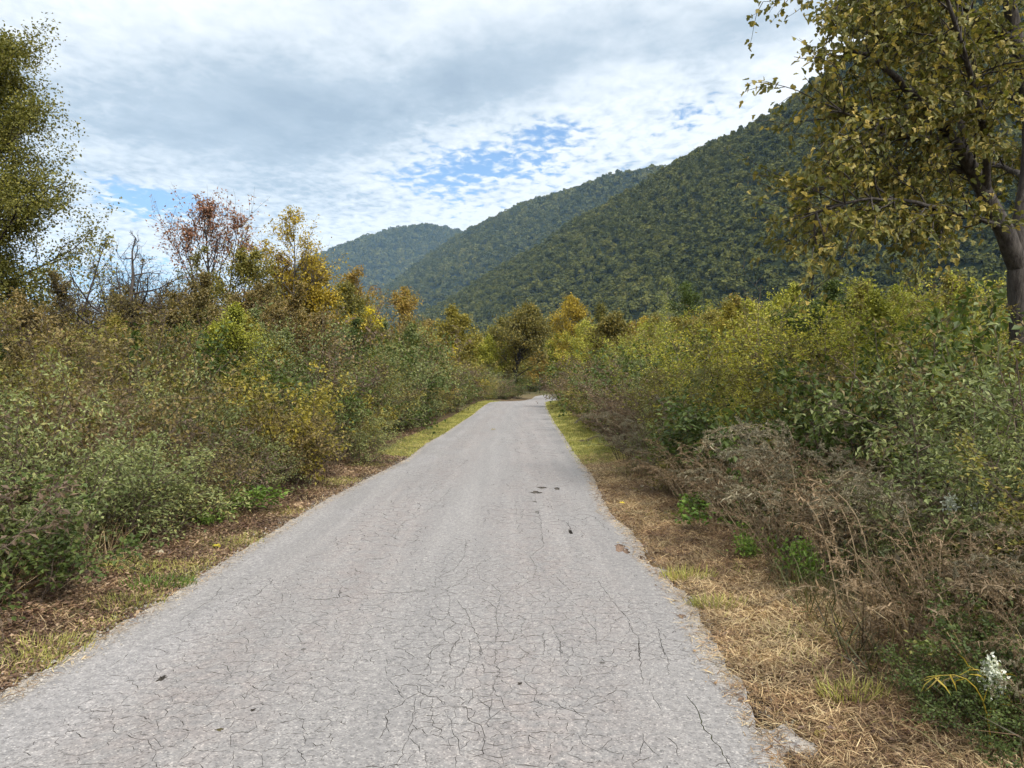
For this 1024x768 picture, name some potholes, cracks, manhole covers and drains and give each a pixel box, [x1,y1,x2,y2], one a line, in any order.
crack [4,561,423,768]
crack [488,461,609,538]
crack [332,429,475,589]
crack [363,536,730,768]
